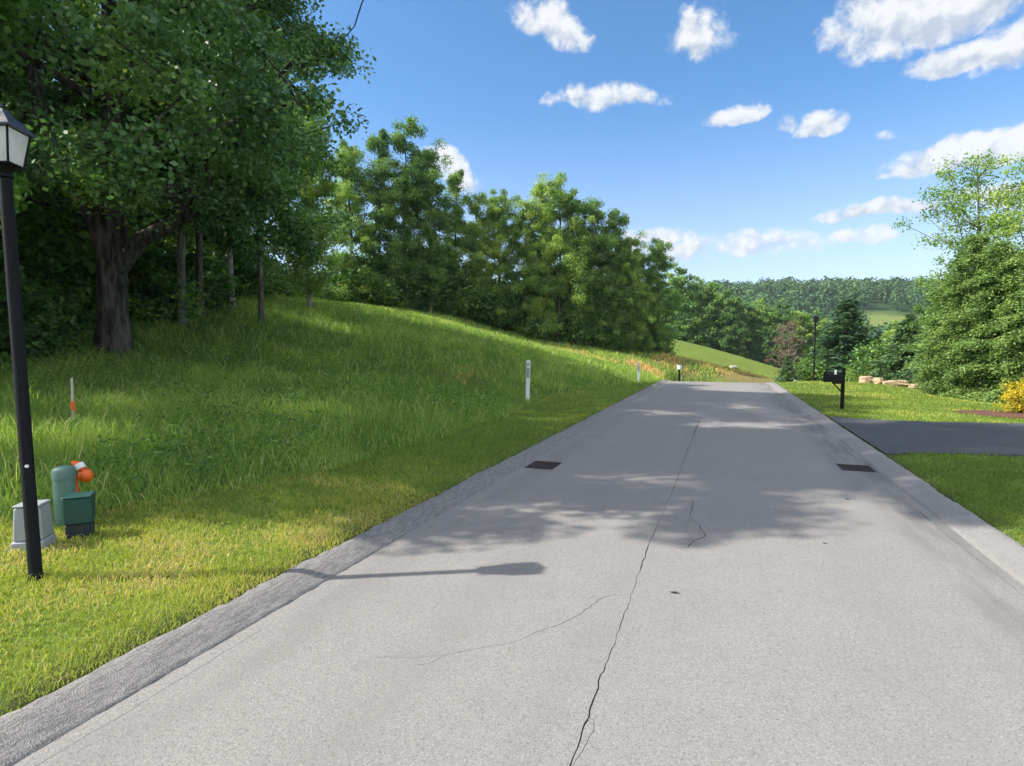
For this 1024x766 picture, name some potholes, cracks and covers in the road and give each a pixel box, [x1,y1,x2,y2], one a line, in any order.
crack [379,420,713,766]
drain grate [836,464,877,473]
drain grate [524,461,561,470]
